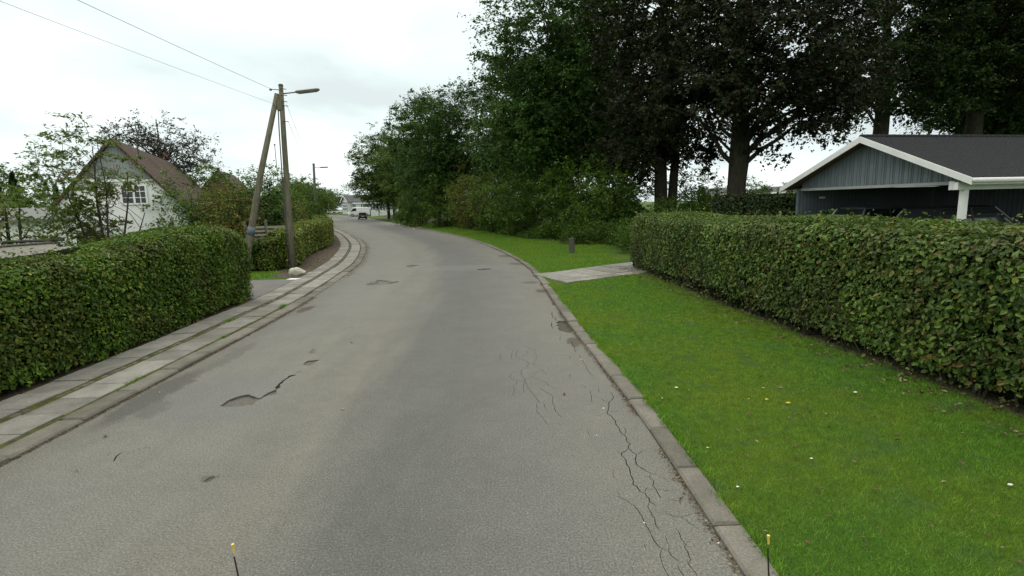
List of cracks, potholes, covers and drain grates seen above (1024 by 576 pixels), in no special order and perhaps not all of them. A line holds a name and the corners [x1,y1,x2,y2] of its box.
pothole [556,321,574,333]
pothole [221,389,277,407]
crack [500,348,562,437]
crack [551,313,699,576]
